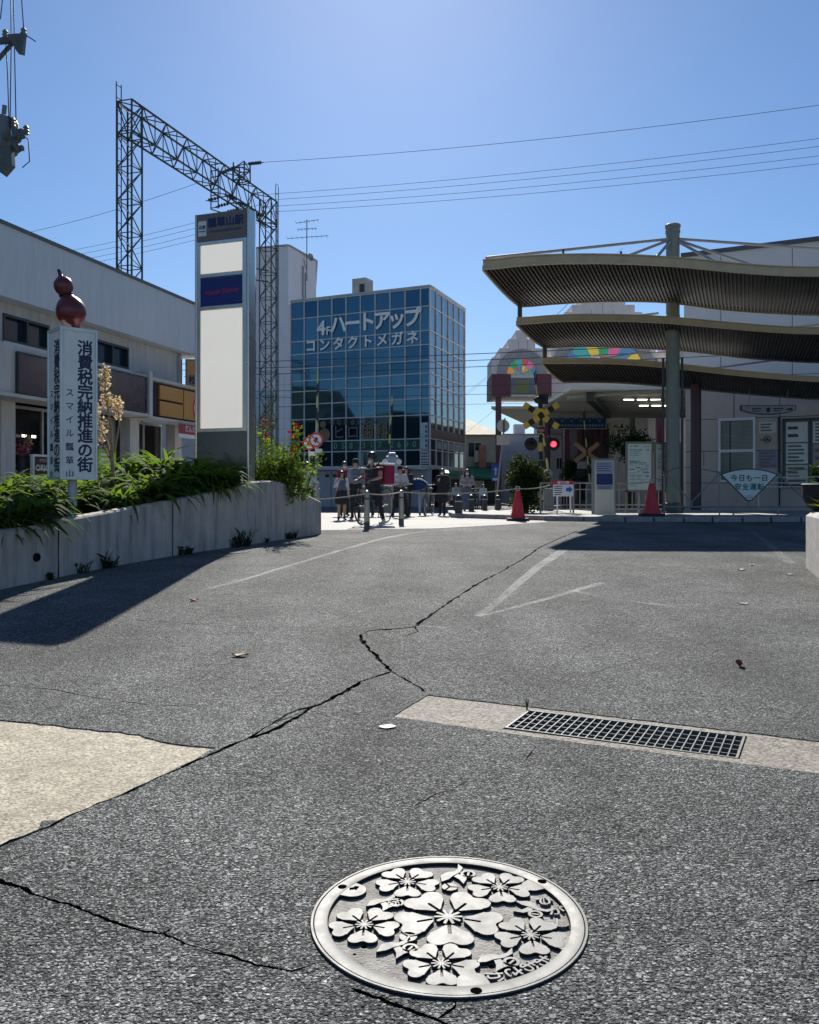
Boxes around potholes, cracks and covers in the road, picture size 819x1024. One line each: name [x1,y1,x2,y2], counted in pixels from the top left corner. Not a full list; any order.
crack [3,531,577,862]
crack [0,879,308,972]
crack [351,988,457,1024]
drain grate [505,710,745,759]
manhole cover [310,856,589,1001]
